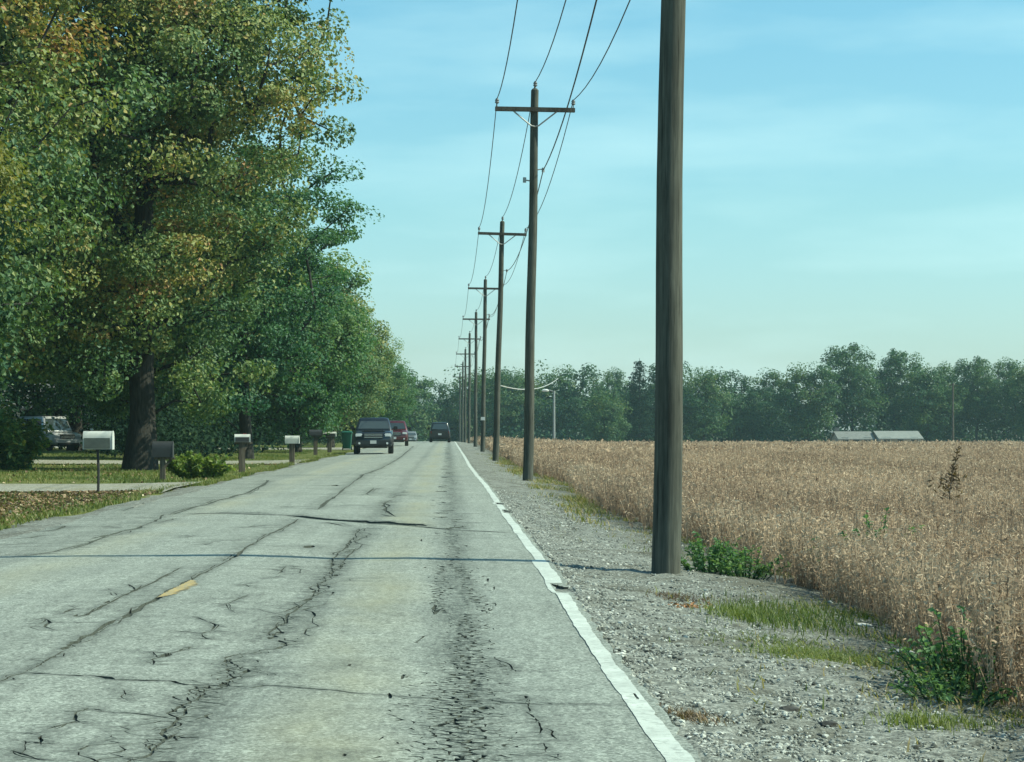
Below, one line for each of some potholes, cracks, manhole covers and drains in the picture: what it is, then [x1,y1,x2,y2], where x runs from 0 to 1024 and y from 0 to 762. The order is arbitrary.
crack [12,447,600,762]
